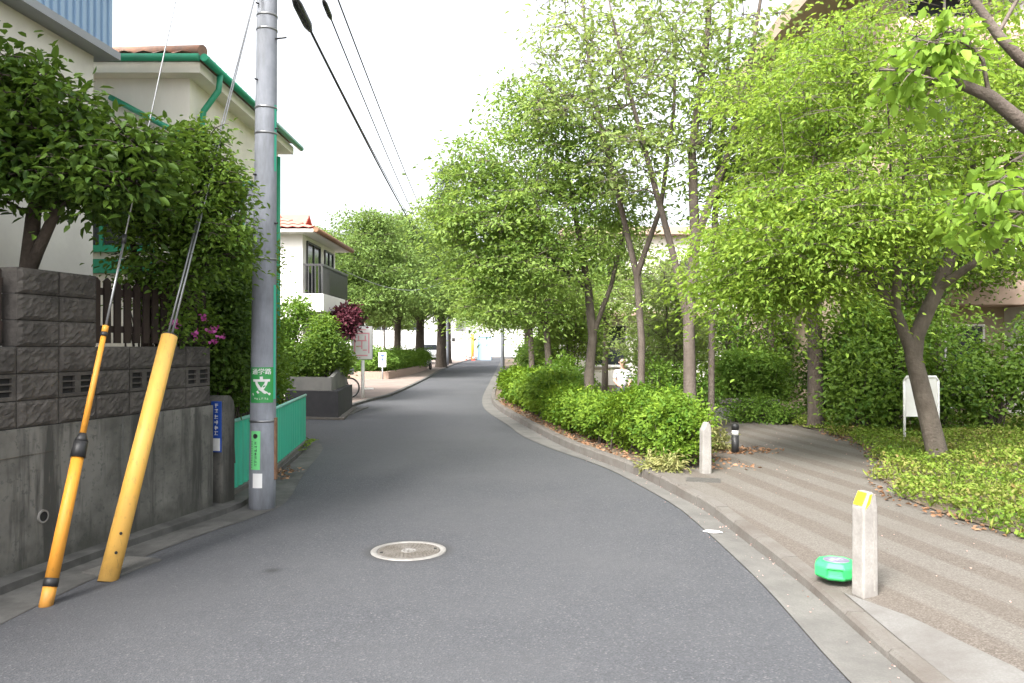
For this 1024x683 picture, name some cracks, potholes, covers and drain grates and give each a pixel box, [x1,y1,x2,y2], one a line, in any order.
manhole cover [370,541,446,561]
